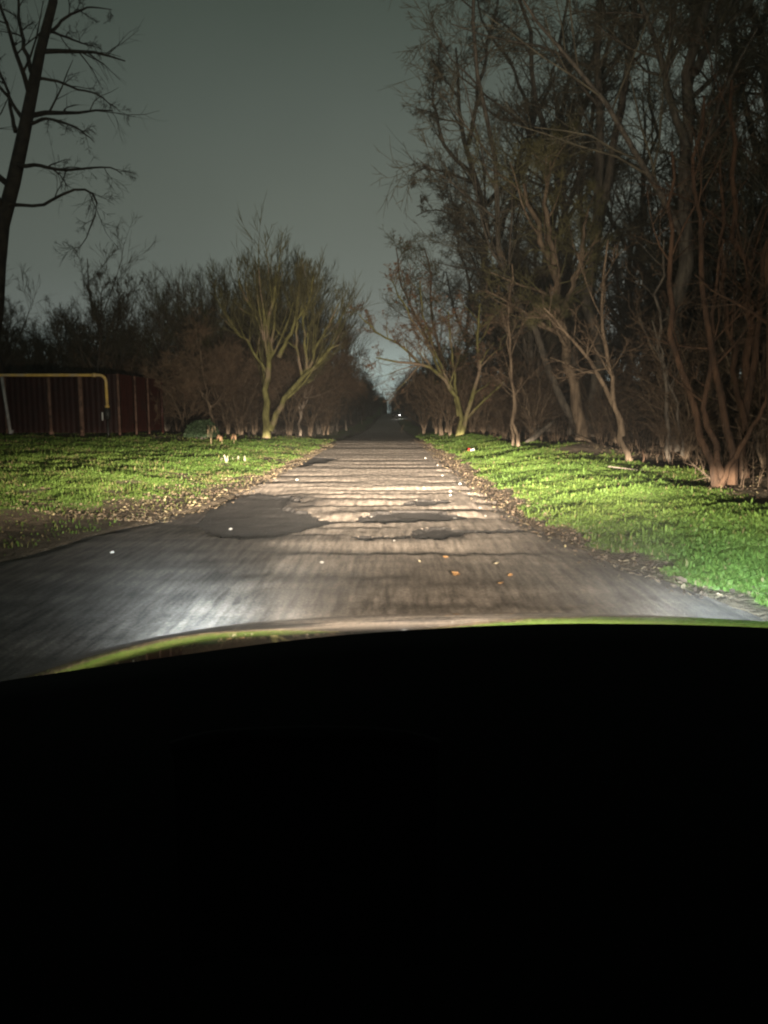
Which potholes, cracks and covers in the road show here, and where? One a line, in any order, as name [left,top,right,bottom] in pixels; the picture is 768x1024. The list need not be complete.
pothole [356,510,467,524]
pothole [281,457,339,472]
pothole [412,527,528,540]
